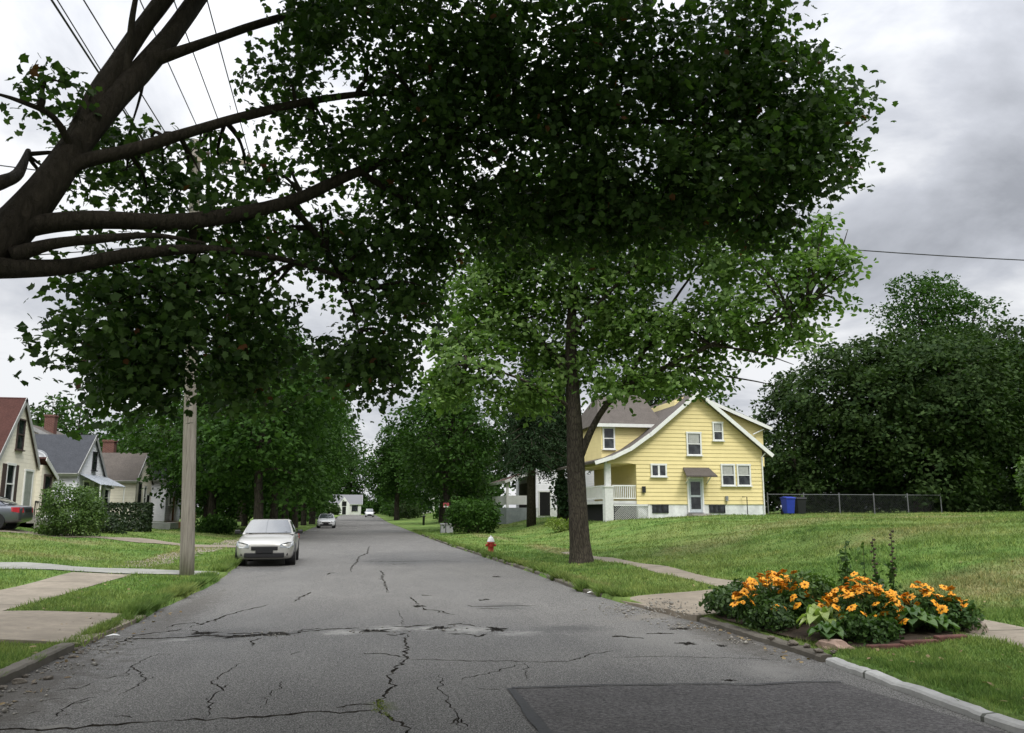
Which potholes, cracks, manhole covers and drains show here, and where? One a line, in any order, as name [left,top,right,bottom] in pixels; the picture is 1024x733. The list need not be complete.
crack [0,595,674,733]
crack [328,547,458,593]
